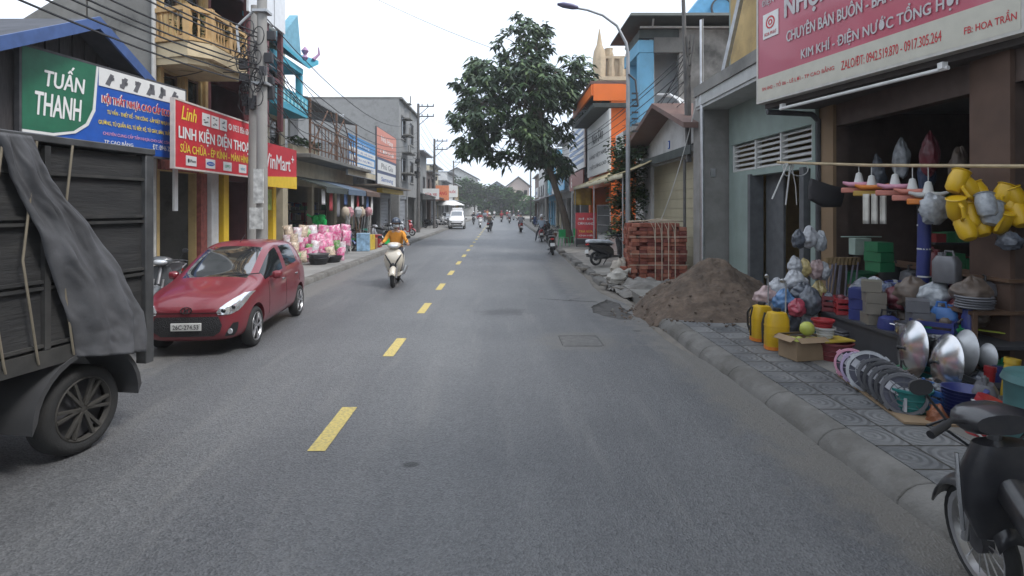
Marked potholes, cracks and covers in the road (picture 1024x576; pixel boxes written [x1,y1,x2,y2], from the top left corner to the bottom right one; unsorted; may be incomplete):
pothole [591,300,633,320]
manhole cover [558,335,603,346]
